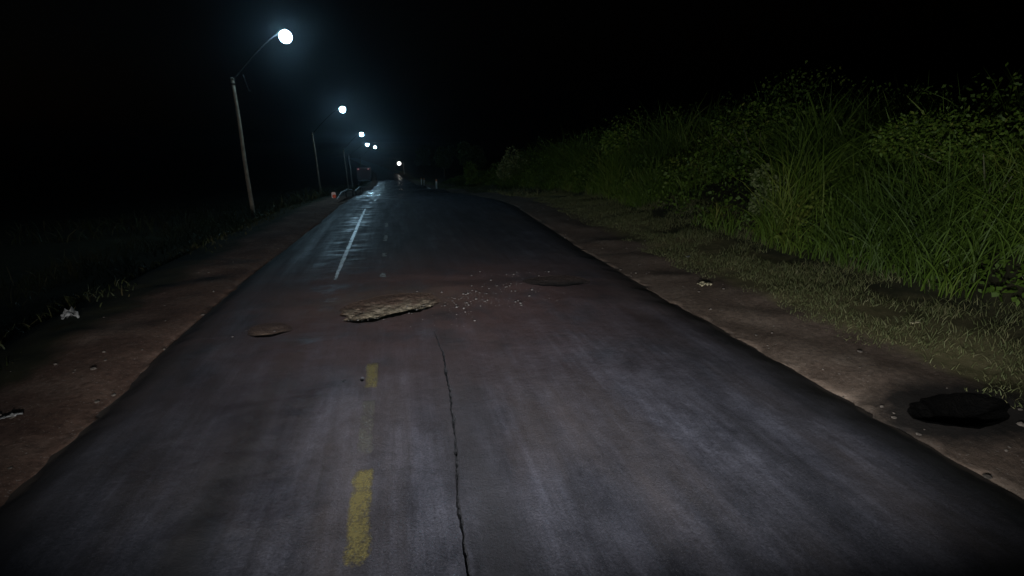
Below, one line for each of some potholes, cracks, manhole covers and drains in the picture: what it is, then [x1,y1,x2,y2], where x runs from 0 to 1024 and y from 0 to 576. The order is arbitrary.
crack [434,331,472,576]
pothole [522,275,590,287]
pothole [907,392,1010,429]
